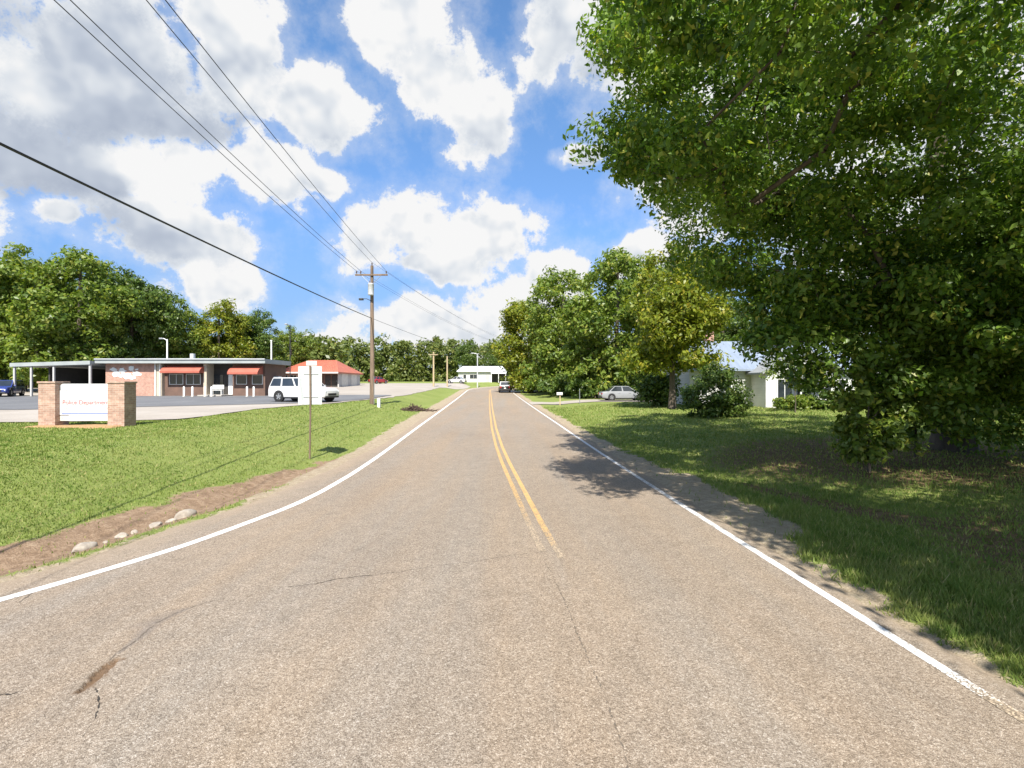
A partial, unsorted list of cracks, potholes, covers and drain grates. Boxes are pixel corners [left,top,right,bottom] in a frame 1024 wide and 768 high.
crack [82,597,226,737]
